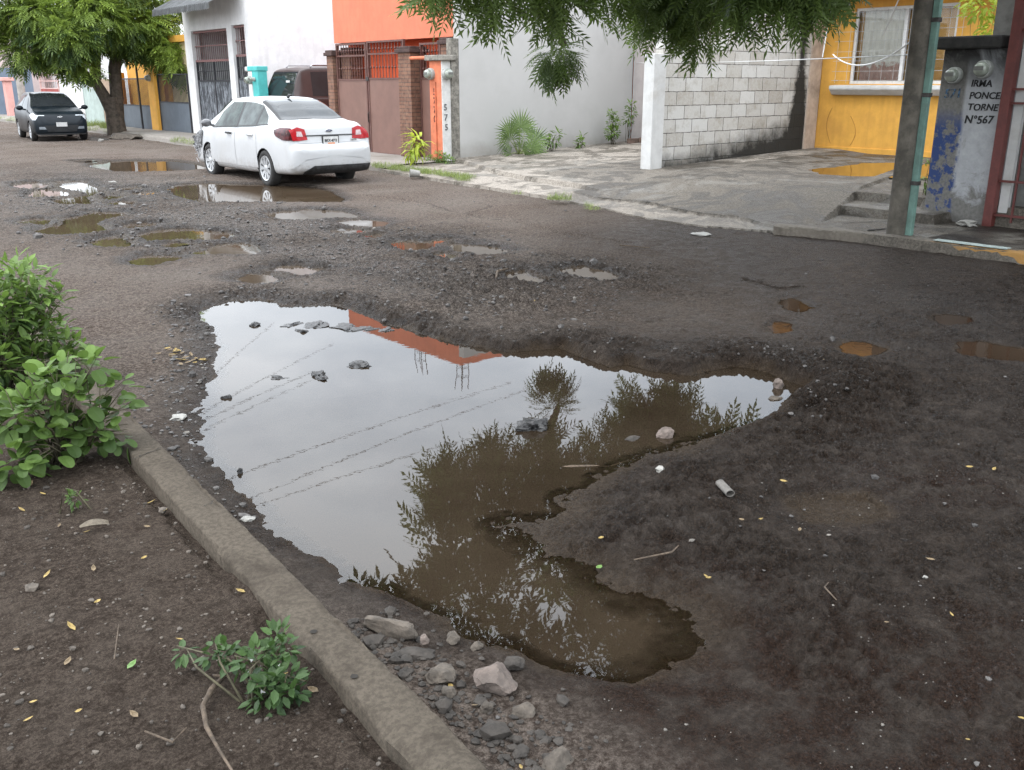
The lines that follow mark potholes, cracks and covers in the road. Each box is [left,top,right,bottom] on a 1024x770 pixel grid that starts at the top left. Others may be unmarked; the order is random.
pothole [83,229,151,247]
pothole [417,247,467,259]
pothole [220,268,283,284]
pothole [943,334,1024,362]
pothole [382,234,465,252]
pothole [497,263,563,283]
pothole [544,259,629,281]
pothole [130,224,241,246]
pothole [445,239,522,255]
pothole [32,177,117,204]
pothole [118,249,185,266]
